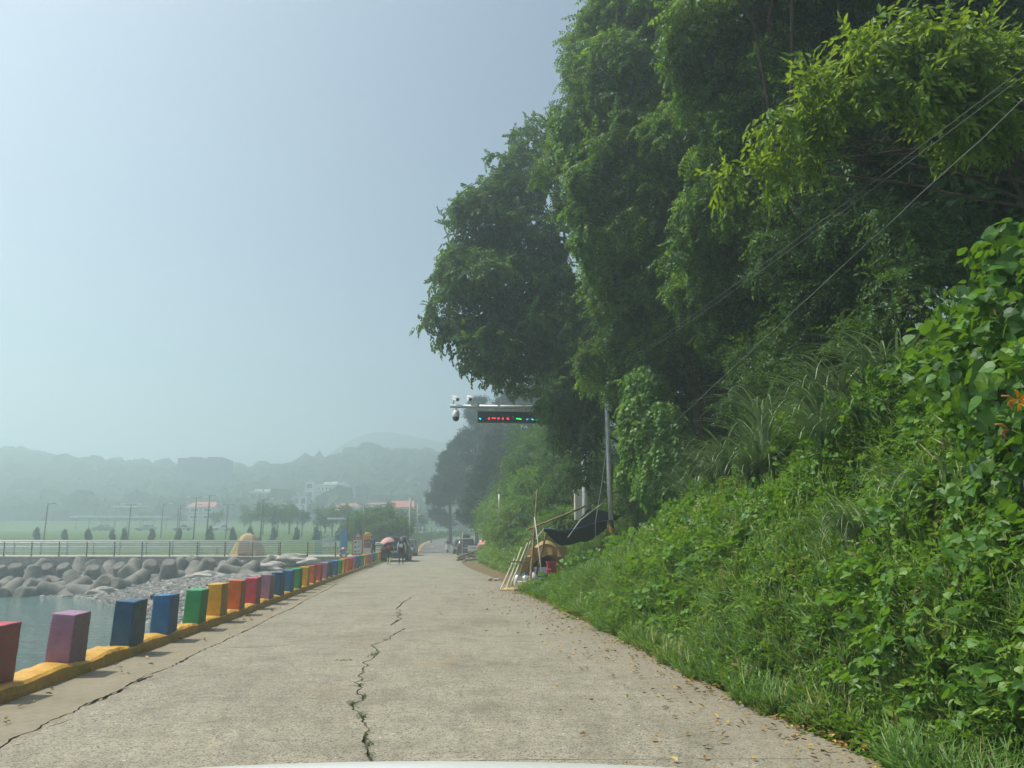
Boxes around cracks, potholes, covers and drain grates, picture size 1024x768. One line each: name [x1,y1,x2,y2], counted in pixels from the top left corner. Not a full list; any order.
crack [352,596,414,762]
